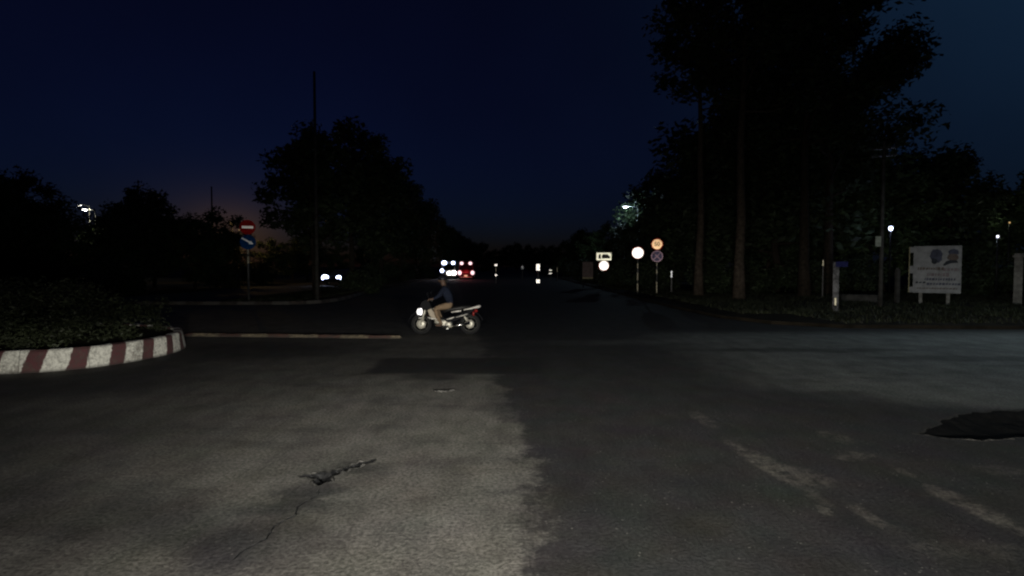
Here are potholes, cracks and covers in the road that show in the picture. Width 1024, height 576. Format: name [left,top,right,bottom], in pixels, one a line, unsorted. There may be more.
pothole [911,409,1024,441]
crack [231,490,319,562]
